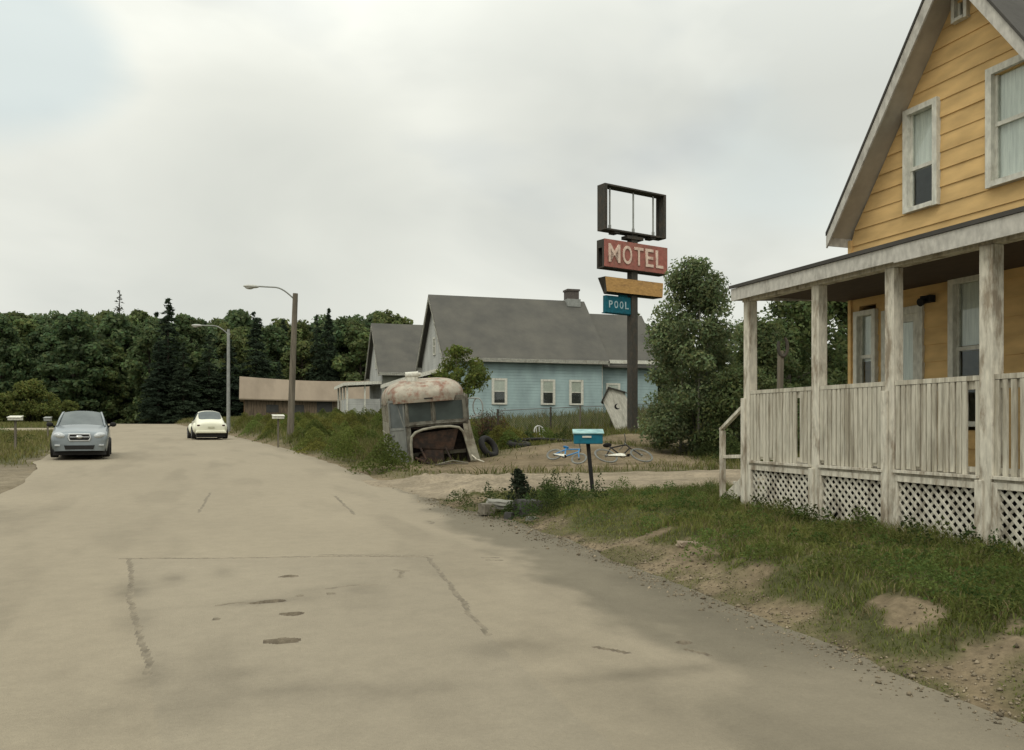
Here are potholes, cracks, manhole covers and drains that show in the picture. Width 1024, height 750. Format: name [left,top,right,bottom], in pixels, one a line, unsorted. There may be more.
crack [119,554,504,677]
crack [683,648,712,656]
crack [334,496,356,515]
crack [593,646,631,654]
